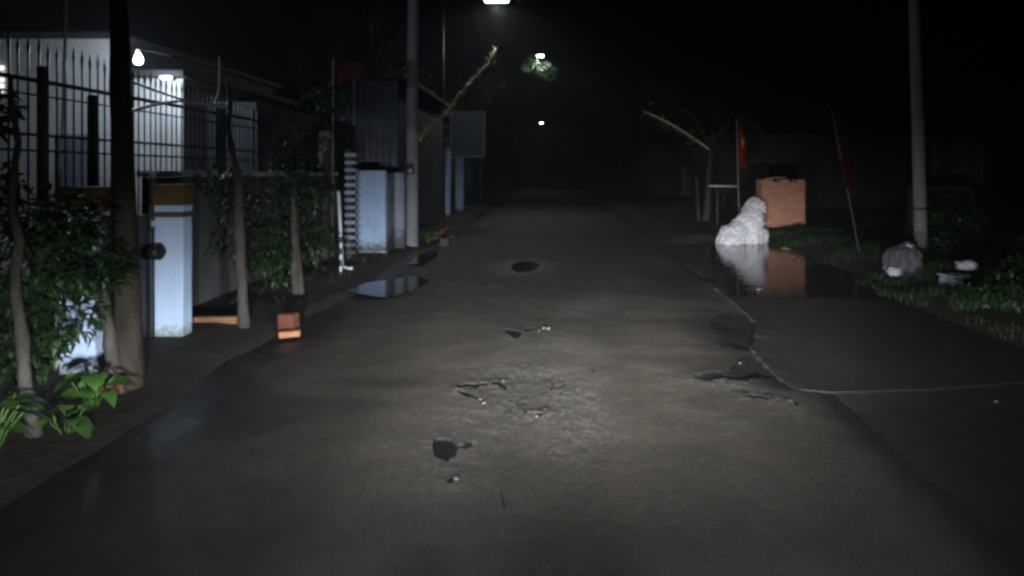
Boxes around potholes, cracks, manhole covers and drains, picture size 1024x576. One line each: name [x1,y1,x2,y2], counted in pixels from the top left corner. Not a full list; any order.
pothole [511,261,541,273]
crack [740,393,800,407]
crack [456,379,588,427]
pothole [500,328,522,339]
pothole [692,353,774,381]
pothole [432,437,472,462]
pothole [708,312,757,351]
